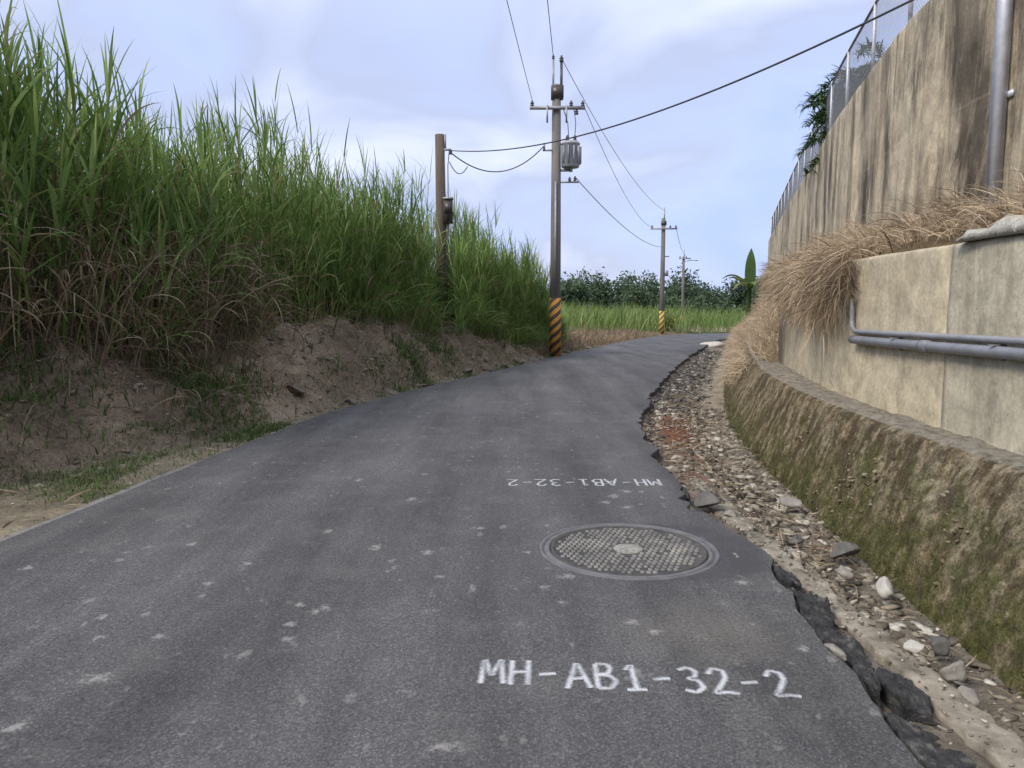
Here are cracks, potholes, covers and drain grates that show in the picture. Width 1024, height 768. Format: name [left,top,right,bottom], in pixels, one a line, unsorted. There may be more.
manhole cover [539,523,720,580]
